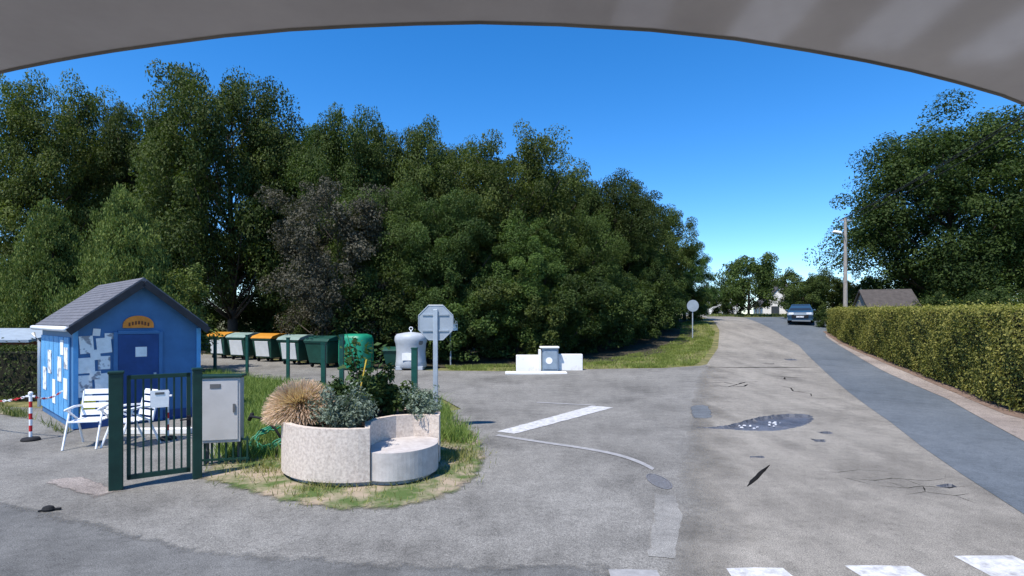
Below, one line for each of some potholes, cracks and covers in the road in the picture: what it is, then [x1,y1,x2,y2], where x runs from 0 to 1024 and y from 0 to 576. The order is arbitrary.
crack [709,363,812,396]
crack [815,470,972,502]
pothole [696,414,814,431]
manhole cover [646,474,673,489]
